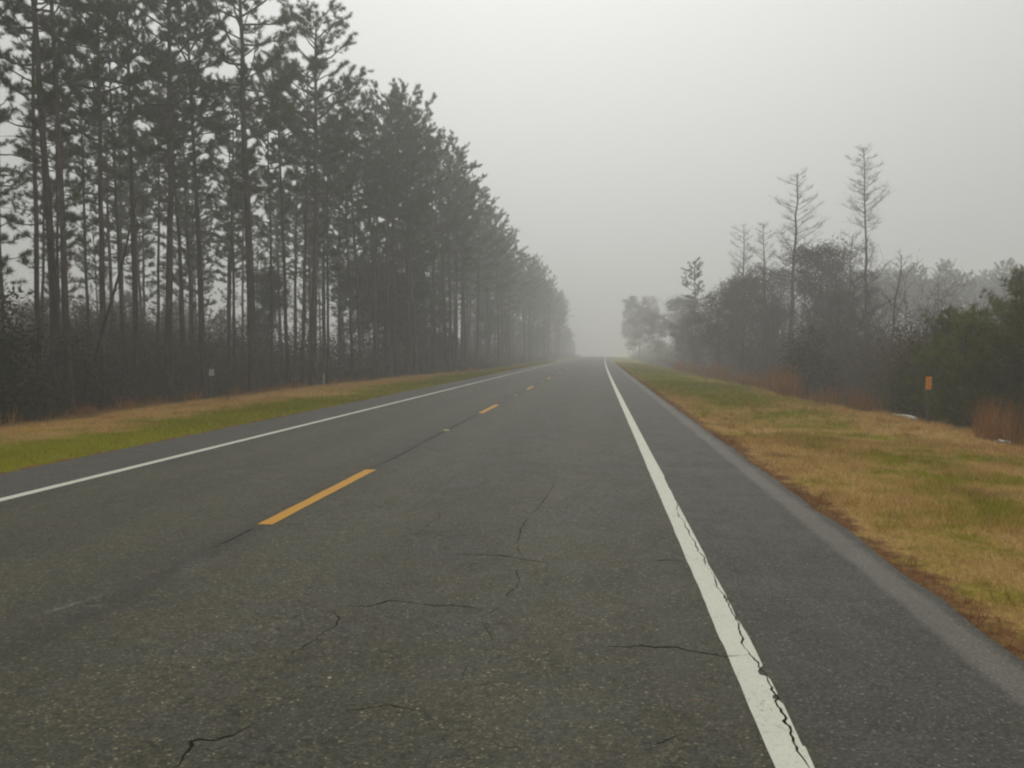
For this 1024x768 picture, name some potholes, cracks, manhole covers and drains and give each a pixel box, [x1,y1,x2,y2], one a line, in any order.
crack [286,487,553,698]
crack [345,704,428,713]
crack [176,722,256,768]
crack [609,481,808,766]
